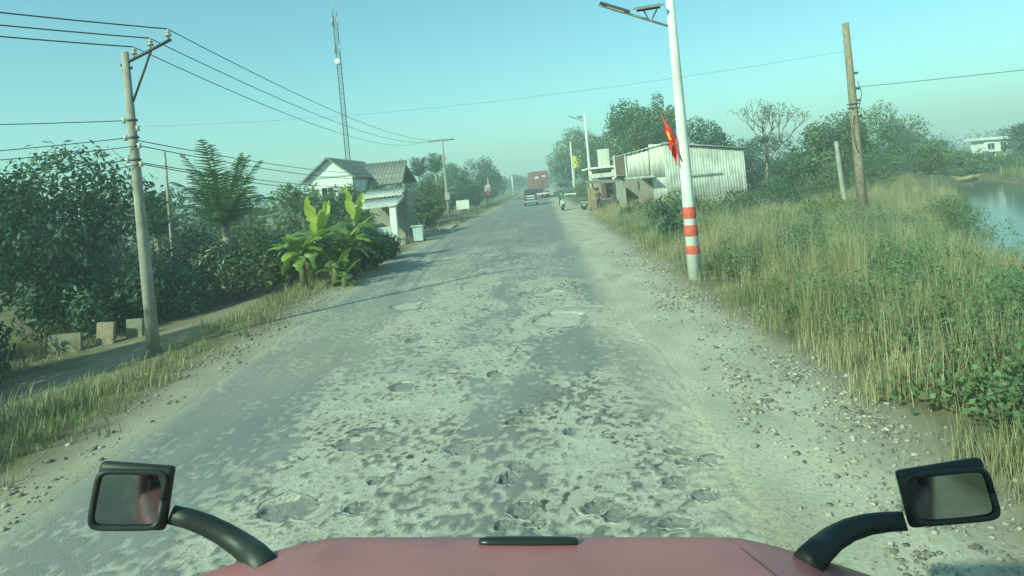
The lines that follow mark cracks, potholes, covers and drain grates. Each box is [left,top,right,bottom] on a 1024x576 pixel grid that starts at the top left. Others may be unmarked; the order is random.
pothole [364,475,389,486]
pothole [485,368,505,379]
pothole [575,498,609,517]
pothole [518,306,595,332]
pothole [492,470,521,486]
pothole [684,486,722,503]
pothole [504,498,539,523]
pothole [384,380,420,394]
pothole [655,474,691,487]
pothole [243,489,339,525]
pothole [598,506,637,525]
pothole [654,515,703,530]
